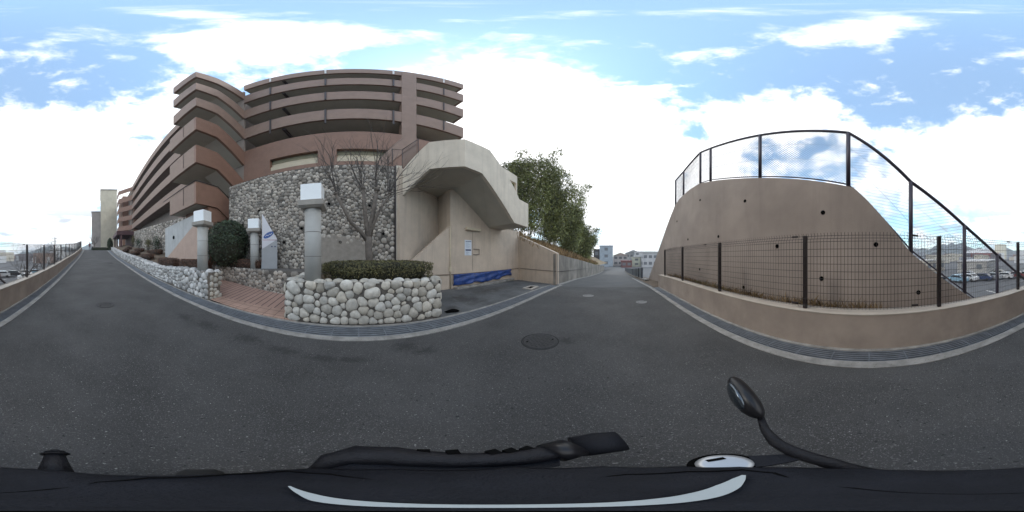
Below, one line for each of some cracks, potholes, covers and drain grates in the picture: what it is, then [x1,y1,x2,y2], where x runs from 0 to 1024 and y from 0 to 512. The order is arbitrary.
manhole cover [521,333,559,350]
